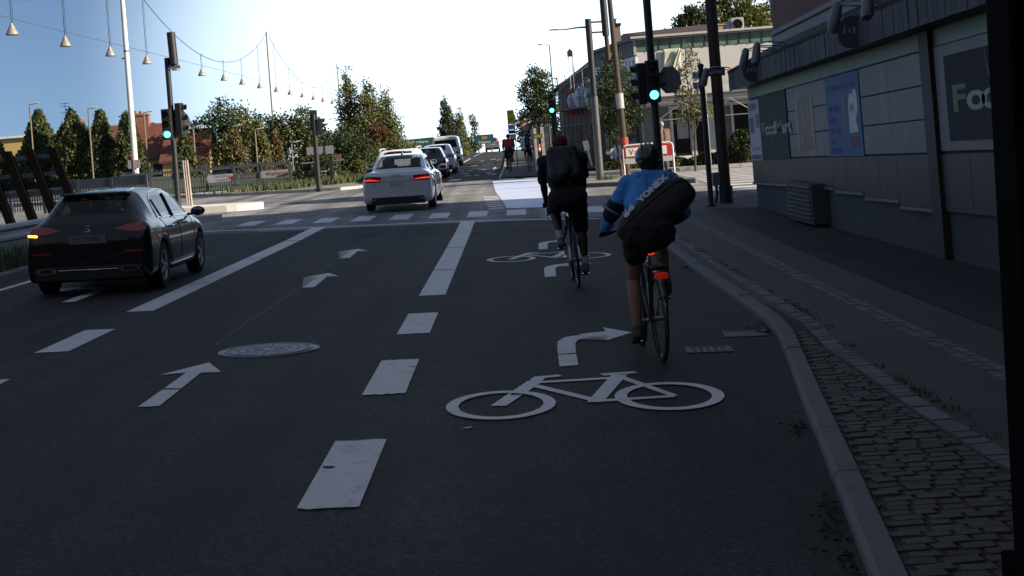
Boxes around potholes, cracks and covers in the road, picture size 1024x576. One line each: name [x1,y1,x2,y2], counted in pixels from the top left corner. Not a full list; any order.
manhole cover [218,342,320,358]
